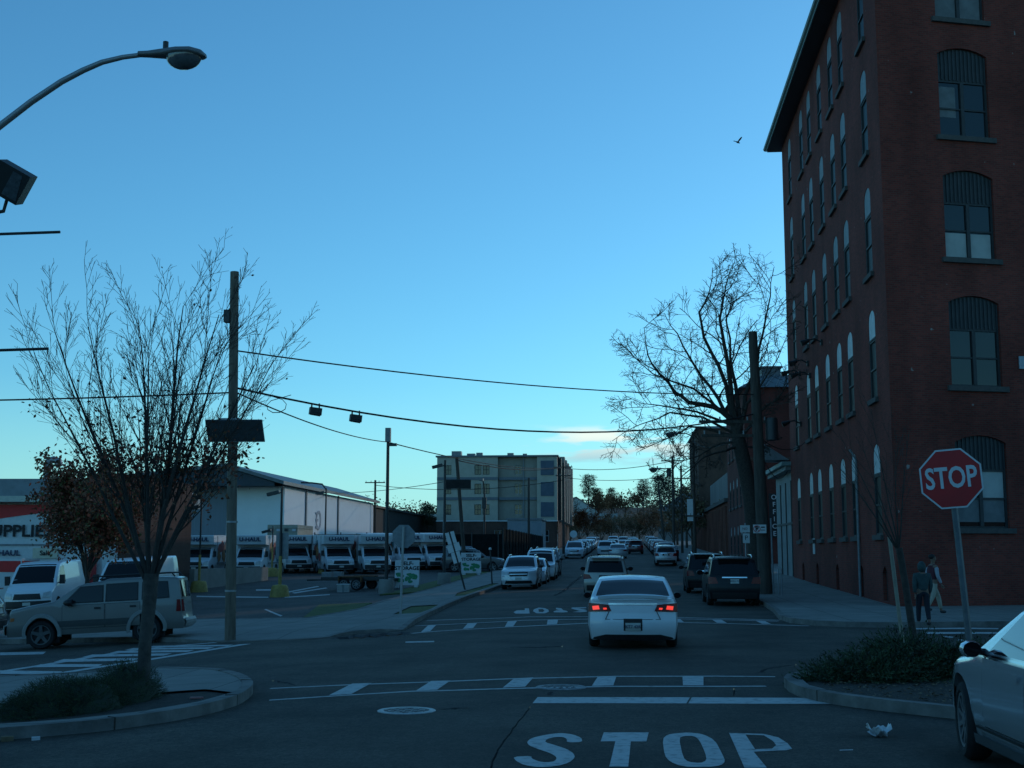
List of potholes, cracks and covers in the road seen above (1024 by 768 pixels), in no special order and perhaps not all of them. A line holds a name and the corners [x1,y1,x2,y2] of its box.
manhole cover [377,707,436,715]
crack [555,576,582,596]
crack [490,707,530,768]
